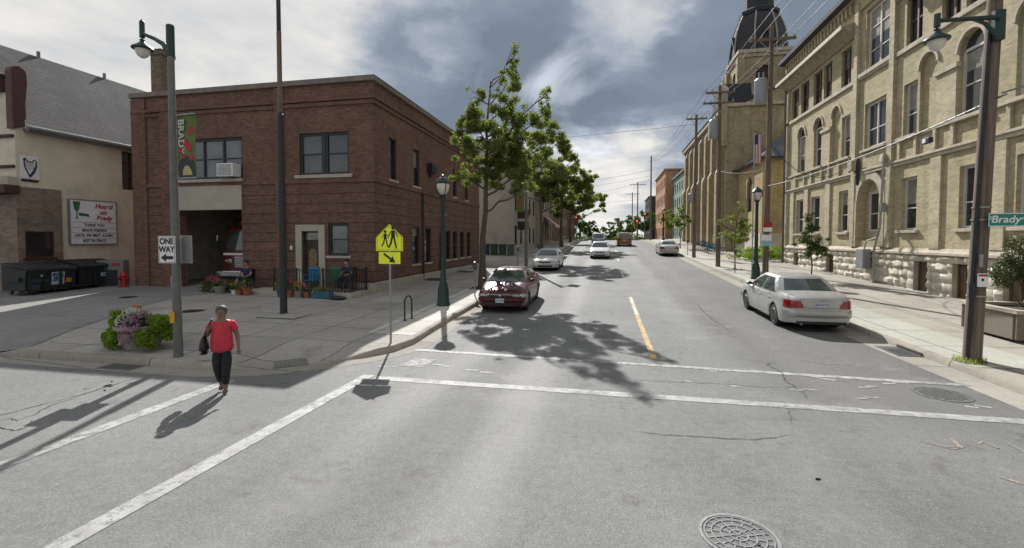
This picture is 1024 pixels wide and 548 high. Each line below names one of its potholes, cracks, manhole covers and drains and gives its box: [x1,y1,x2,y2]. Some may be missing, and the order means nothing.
manhole cover [698,513,782,548]
drain grate [875,344,922,357]
manhole cover [911,387,975,403]
crack [623,363,806,440]
